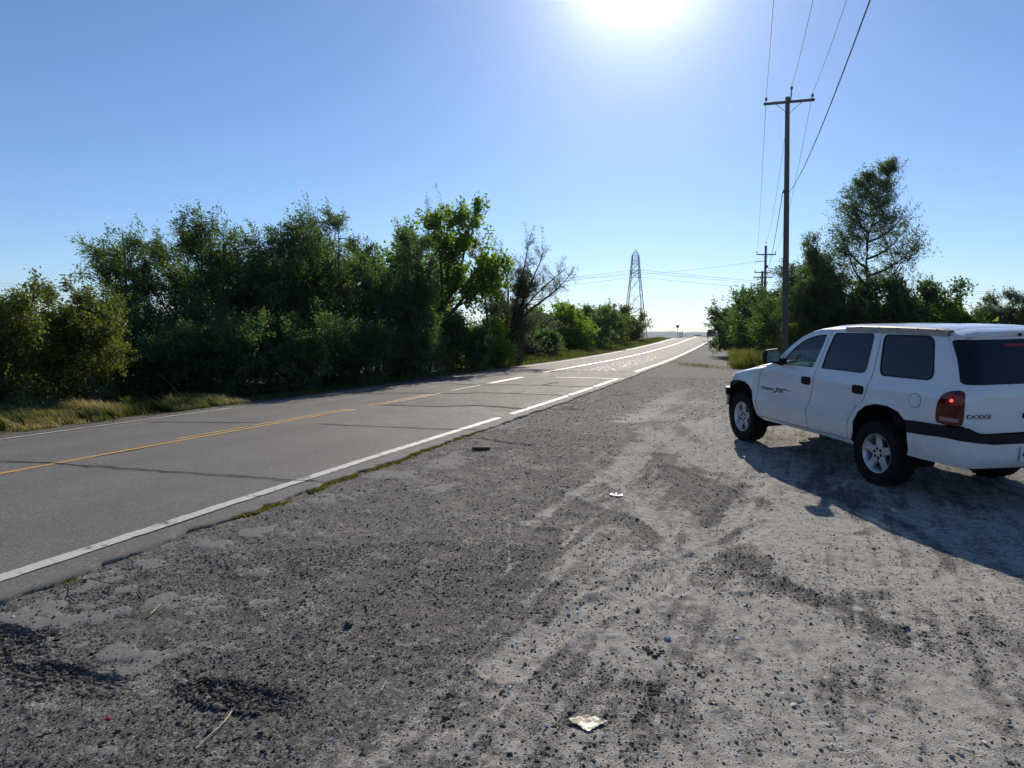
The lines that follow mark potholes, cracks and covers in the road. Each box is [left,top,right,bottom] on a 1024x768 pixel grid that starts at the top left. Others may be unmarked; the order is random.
crack [10,461,323,482]
crack [210,422,478,430]
pothole [179,680,301,713]
pothole [0,622,55,667]
pothole [0,658,130,697]
crack [291,382,630,410]
